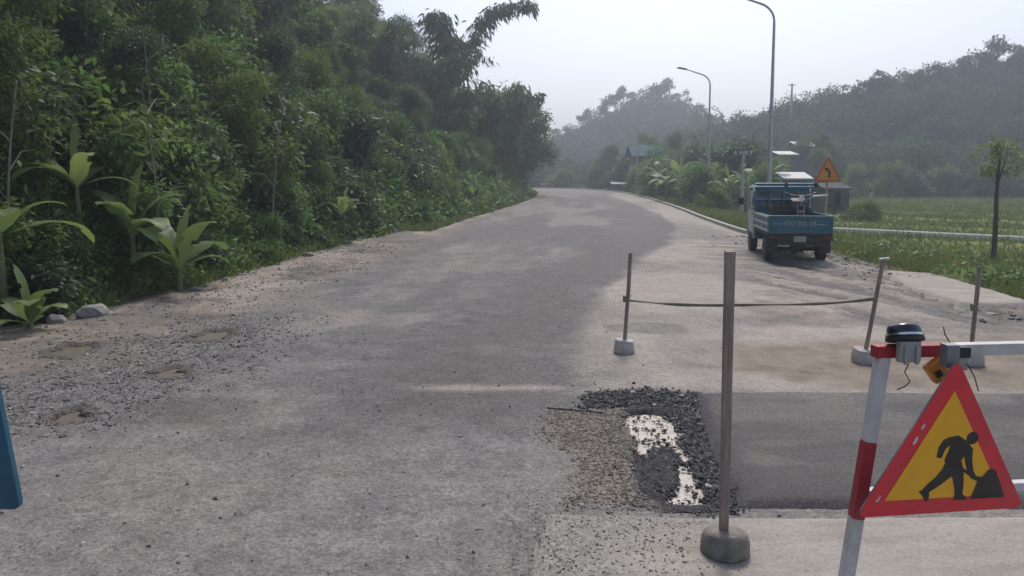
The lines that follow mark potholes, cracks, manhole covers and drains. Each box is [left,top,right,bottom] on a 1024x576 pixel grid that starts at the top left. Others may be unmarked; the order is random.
pothole [35,403,101,427]
pothole [136,363,199,381]
pothole [180,327,242,344]
pothole [37,341,107,360]
